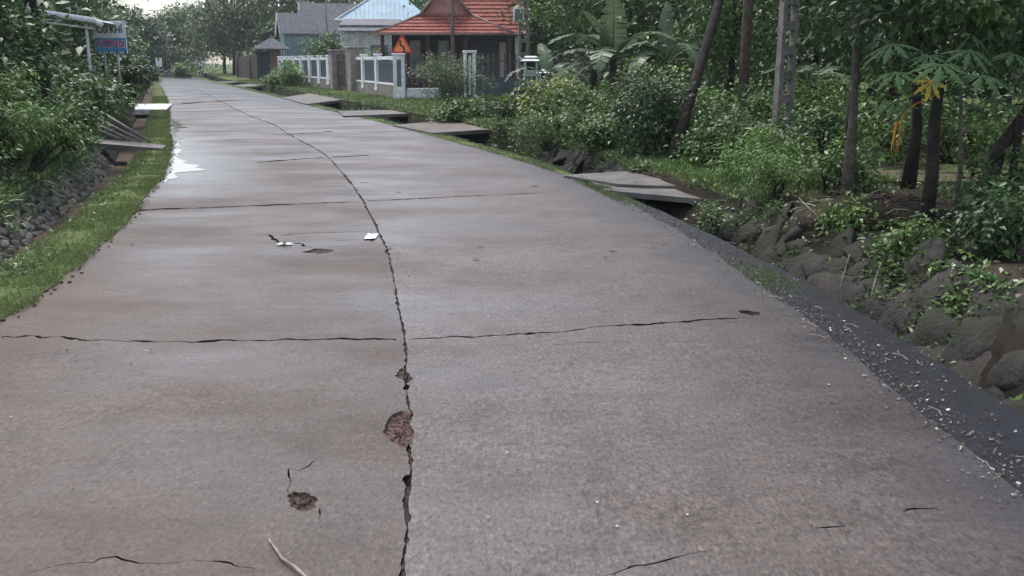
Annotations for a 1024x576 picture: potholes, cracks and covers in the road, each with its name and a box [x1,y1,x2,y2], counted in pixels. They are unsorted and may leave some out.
pothole [383,411,414,449]
crack [2,90,745,576]
pothole [396,368,413,383]
pothole [287,492,318,511]
